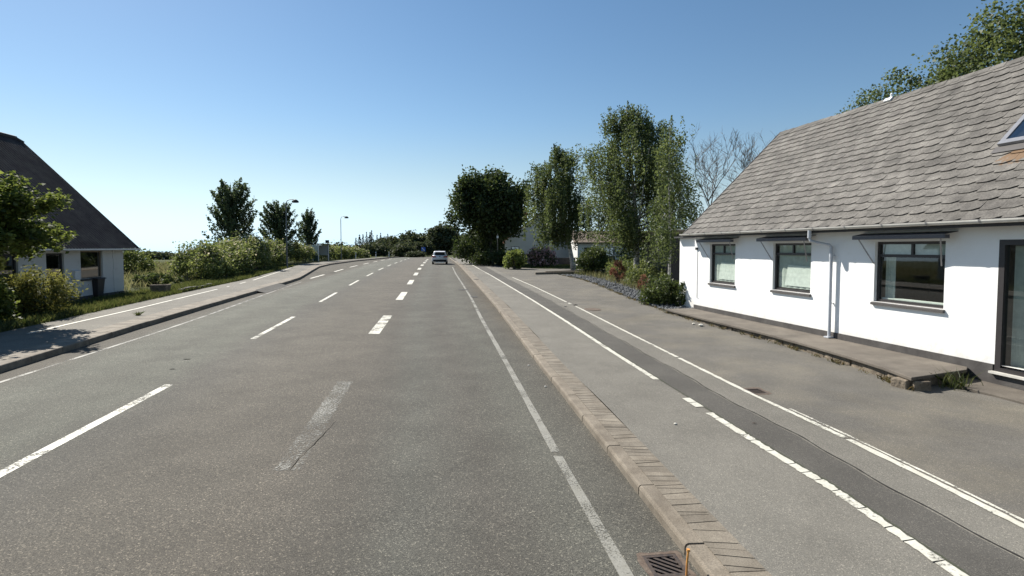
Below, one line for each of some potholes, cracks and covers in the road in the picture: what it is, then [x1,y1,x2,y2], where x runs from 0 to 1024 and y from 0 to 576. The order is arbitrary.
drain grate [642,553,691,576]
